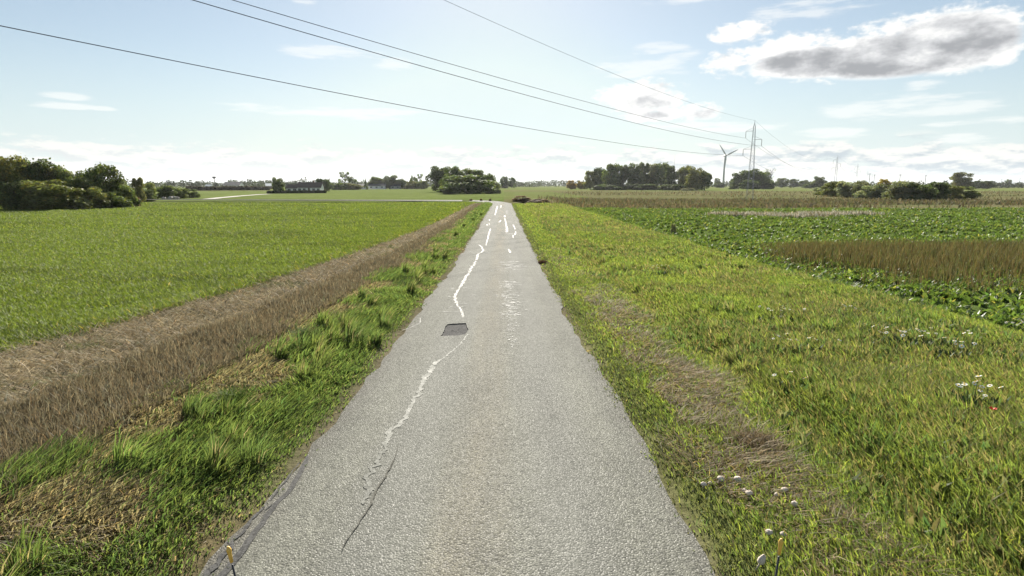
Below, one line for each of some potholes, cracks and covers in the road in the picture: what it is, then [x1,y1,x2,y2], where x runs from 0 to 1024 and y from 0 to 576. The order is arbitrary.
crack [442,206,533,347]
crack [342,319,468,549]
